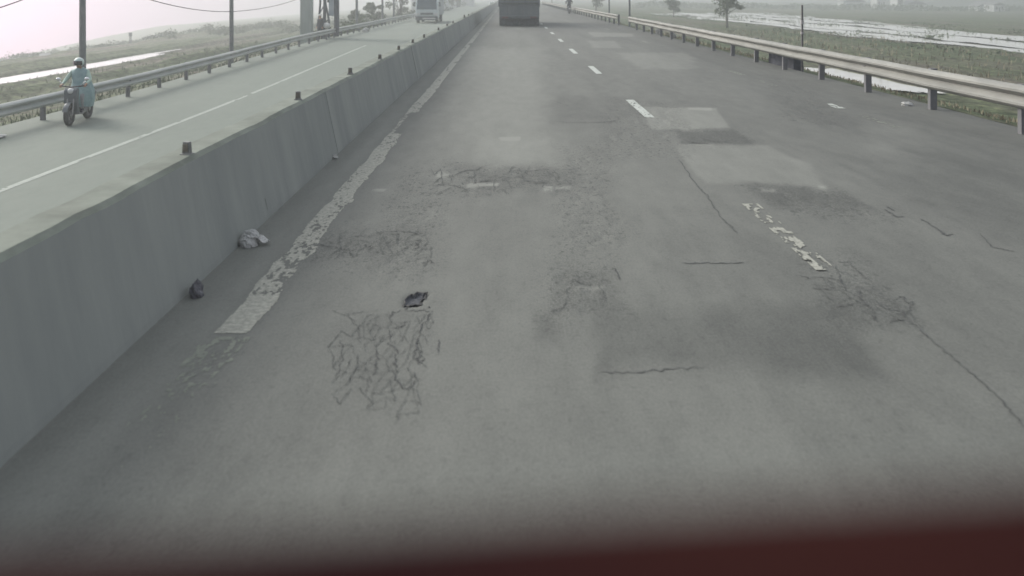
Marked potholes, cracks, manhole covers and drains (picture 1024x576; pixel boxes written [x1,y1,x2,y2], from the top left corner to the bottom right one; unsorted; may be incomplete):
crack [800,261,1024,427]
crack [320,228,434,266]
crack [554,269,620,310]
pothole [402,291,428,307]
crack [327,305,440,420]
crack [431,165,560,194]
